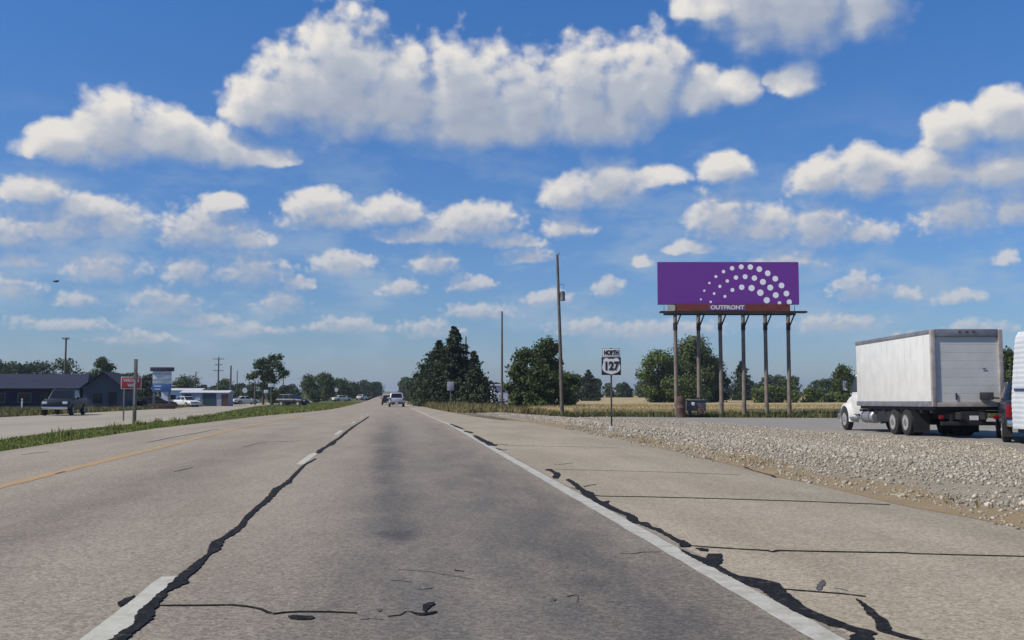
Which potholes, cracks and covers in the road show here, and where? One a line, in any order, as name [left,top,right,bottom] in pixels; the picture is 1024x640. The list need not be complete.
crack [361,569,473,620]
